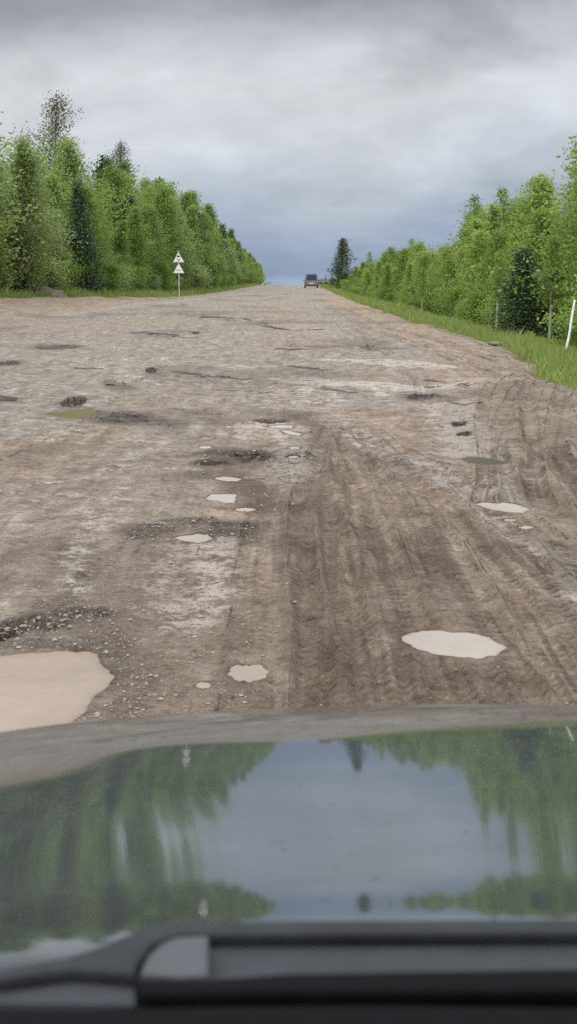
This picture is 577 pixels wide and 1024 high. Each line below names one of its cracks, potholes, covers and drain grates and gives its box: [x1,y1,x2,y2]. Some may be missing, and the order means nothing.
pothole [188,458,237,467]
pothole [87,411,166,424]
pothole [453,457,513,468]
pothole [50,396,95,409]
pothole [390,627,519,663]
pothole [199,493,243,505]
pothole [165,532,221,545]
pothole [0,647,127,732]
pothole [39,407,103,420]
pothole [216,450,281,463]
pothole [396,392,446,401]
pothole [470,500,538,515]
